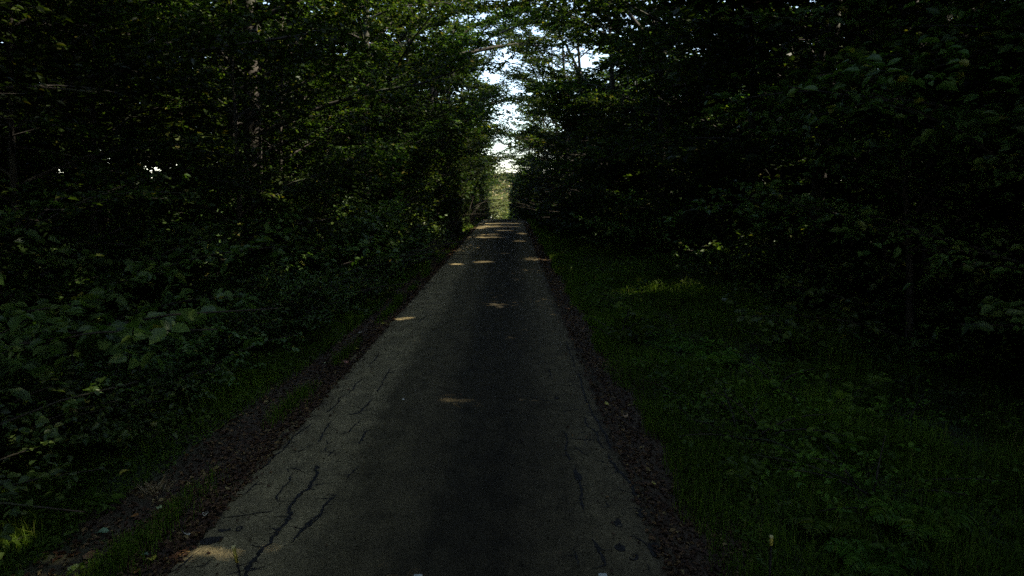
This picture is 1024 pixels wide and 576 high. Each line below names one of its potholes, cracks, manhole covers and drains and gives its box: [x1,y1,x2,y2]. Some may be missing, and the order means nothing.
crack [173,353,394,576]
crack [527,341,642,510]
